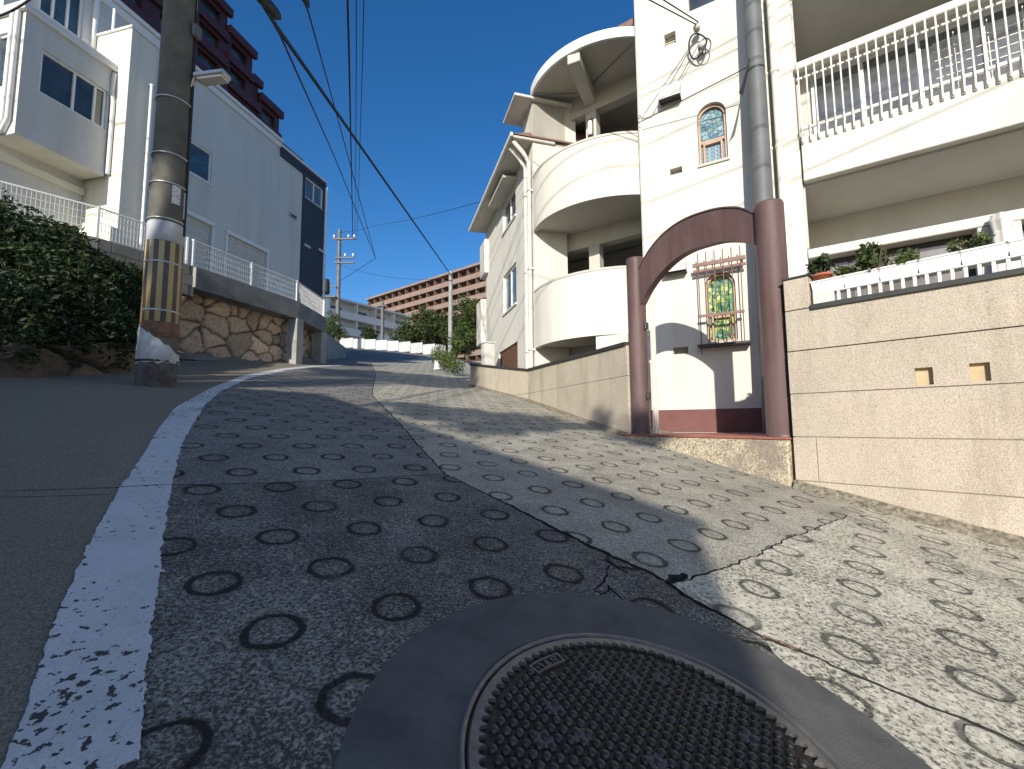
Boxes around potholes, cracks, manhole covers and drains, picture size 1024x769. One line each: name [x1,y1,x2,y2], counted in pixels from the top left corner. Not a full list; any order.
manhole cover [335,593,932,769]
